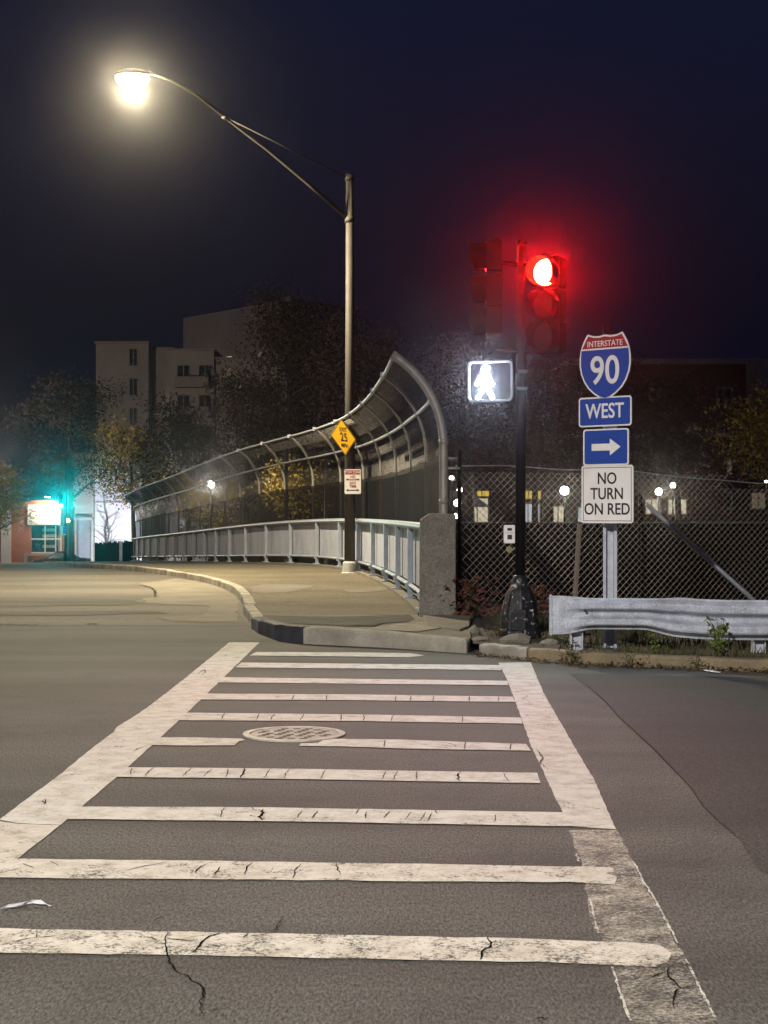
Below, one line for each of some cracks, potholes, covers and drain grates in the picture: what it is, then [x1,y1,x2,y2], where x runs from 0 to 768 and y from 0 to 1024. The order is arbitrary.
manhole cover [243,726,345,742]
crack [149,917,248,1013]
crack [650,963,693,1009]
crack [477,936,496,959]
